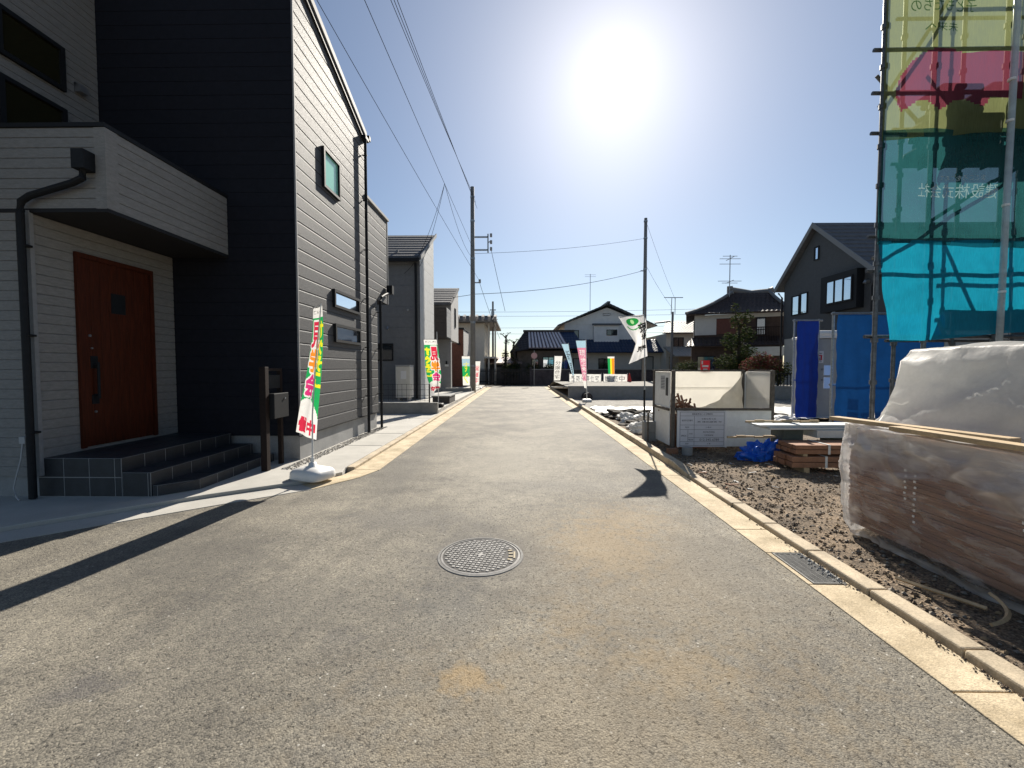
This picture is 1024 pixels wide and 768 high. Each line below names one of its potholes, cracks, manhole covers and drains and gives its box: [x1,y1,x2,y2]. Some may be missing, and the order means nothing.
manhole cover [437,537,523,577]
drain grate [772,553,847,585]
